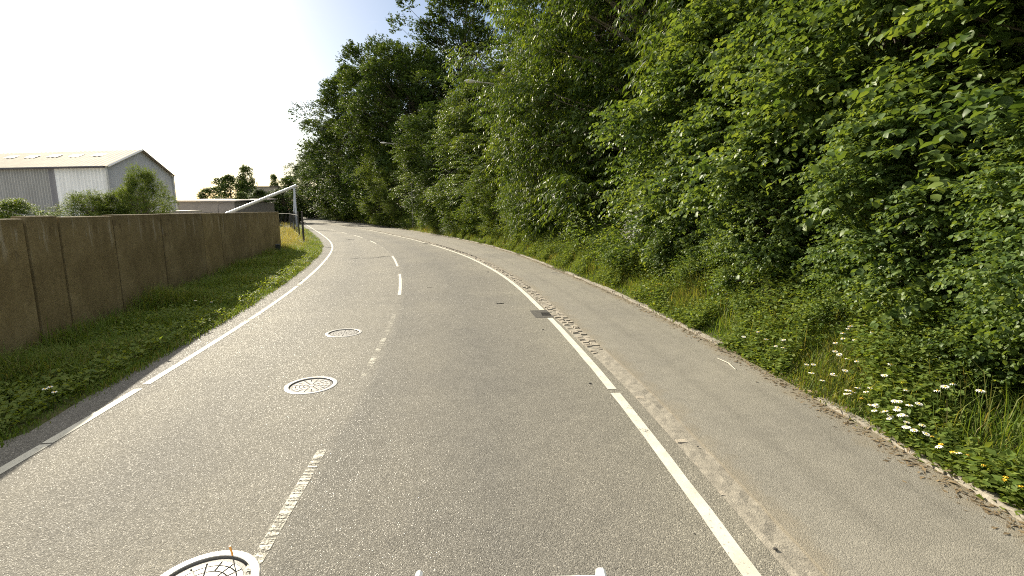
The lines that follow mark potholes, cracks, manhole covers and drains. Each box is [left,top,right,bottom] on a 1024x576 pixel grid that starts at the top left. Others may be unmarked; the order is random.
manhole cover [160,550,261,576]
manhole cover [284,376,338,395]
manhole cover [325,328,362,337]
